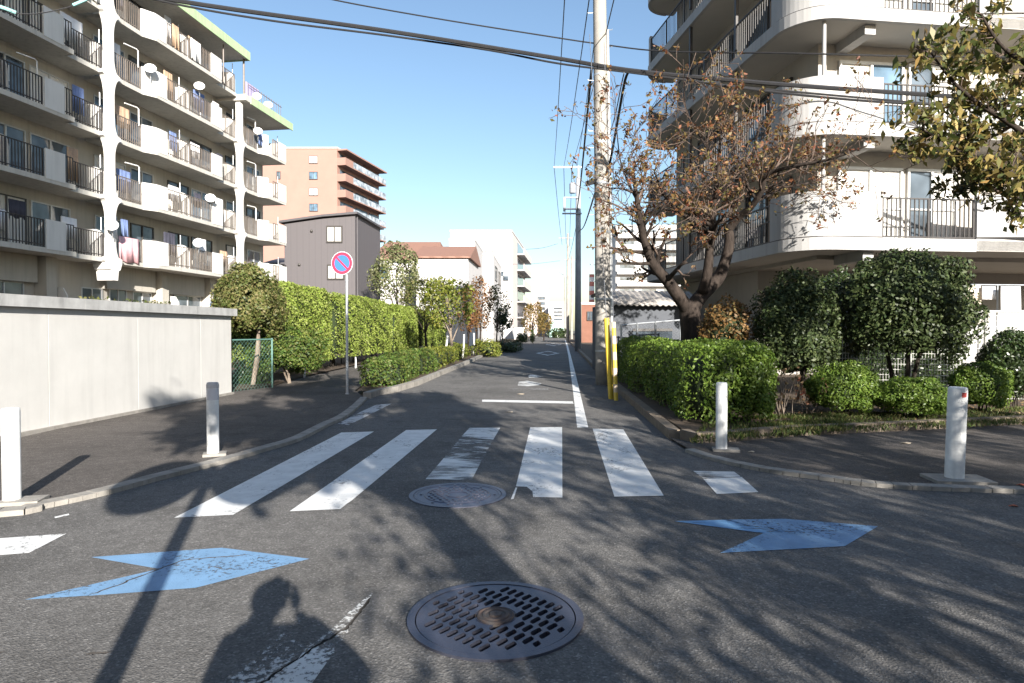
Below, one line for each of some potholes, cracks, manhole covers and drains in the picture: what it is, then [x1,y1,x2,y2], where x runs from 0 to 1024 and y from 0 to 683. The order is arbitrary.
manhole cover [409,483,506,508]
manhole cover [407,581,584,663]
